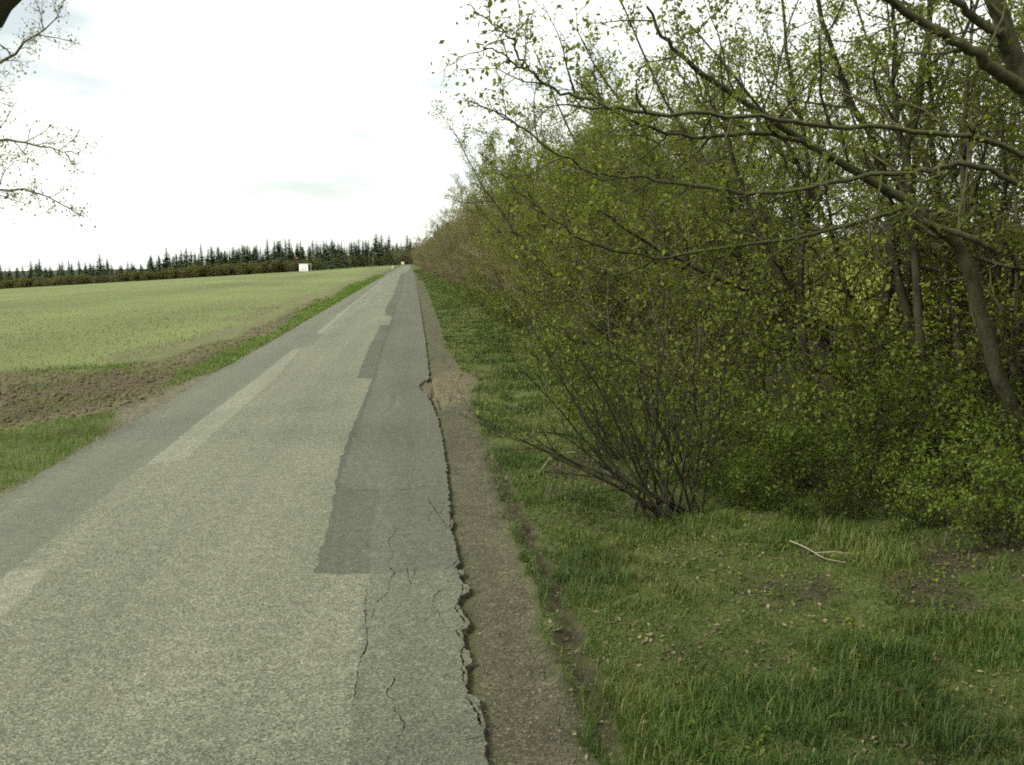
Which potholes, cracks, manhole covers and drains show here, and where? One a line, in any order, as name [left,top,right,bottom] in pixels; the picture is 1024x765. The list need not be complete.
crack [386,677,405,764]
crack [336,484,483,740]
